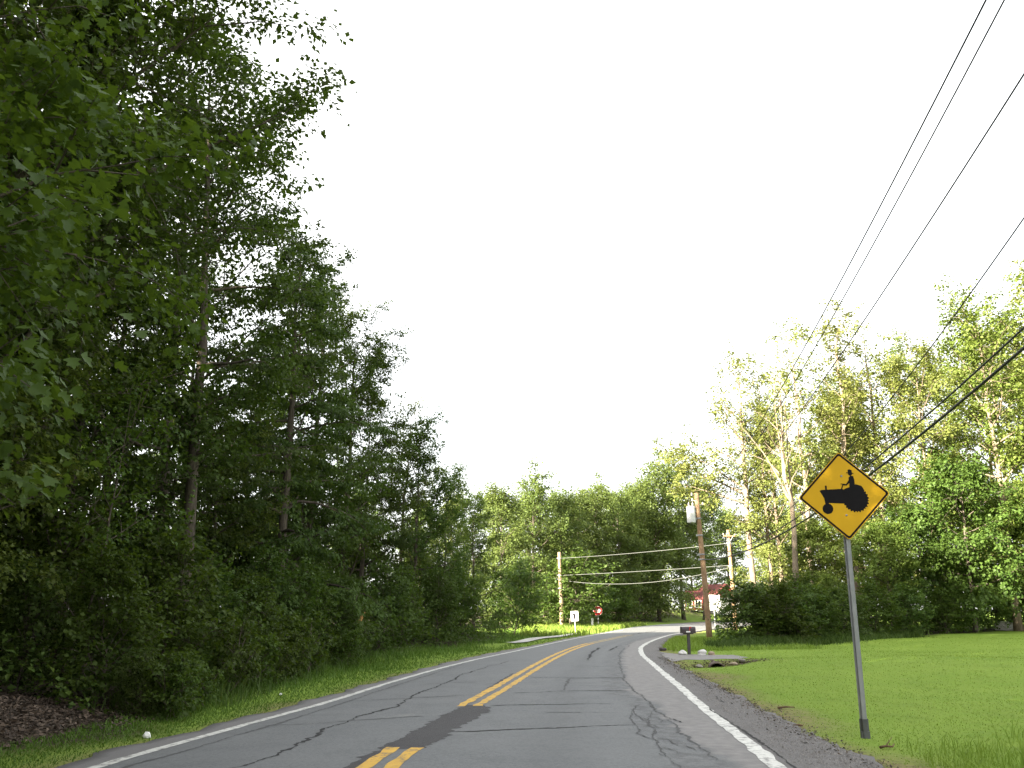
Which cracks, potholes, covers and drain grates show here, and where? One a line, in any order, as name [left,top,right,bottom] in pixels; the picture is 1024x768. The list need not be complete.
crack [452,677,611,732]
crack [629,698,695,768]
crack [122,661,507,768]
